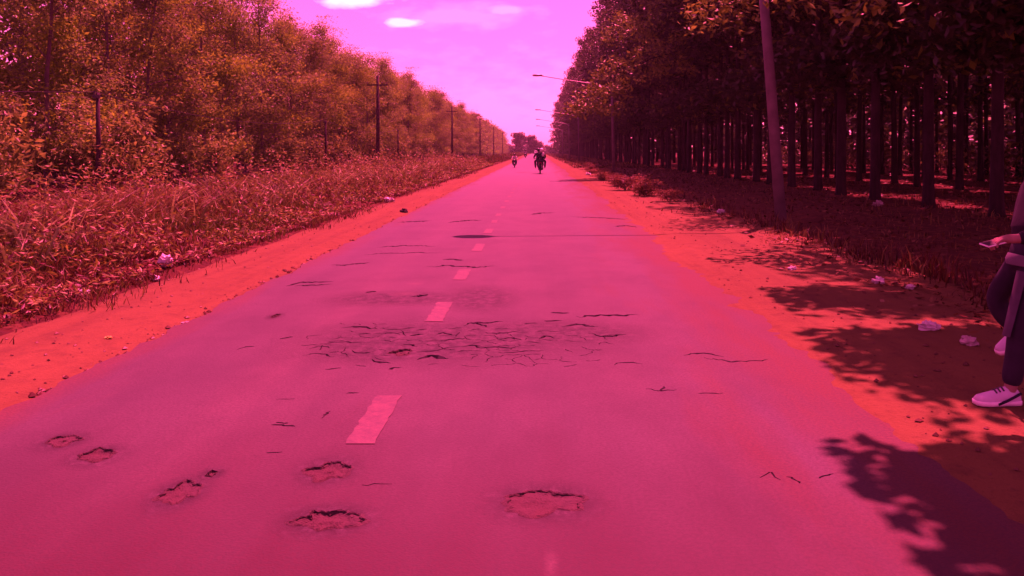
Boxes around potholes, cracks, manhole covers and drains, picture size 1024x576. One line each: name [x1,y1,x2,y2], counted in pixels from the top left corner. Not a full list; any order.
crack [688,353,767,362]
pothole [300,461,355,483]
crack [280,312,637,370]
pothole [44,435,85,448]
pothole [284,509,371,532]
pothole [77,447,117,463]
pothole [501,489,589,519]
pothole [151,479,204,505]
